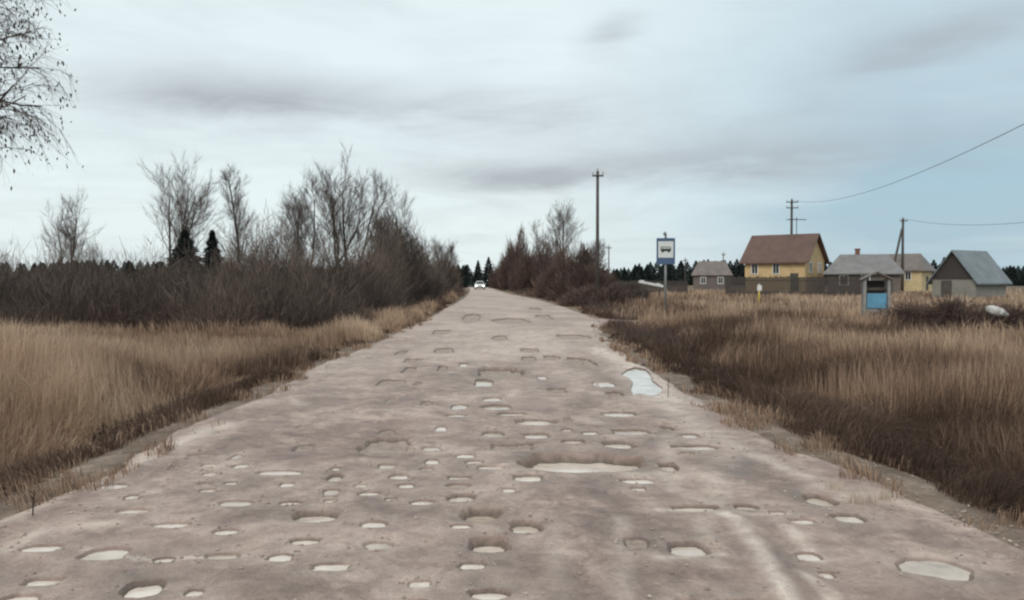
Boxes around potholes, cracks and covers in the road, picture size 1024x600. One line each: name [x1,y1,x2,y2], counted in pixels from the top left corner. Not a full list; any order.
pothole [666,541,712,556]
pothole [508,520,545,533]
pothole [516,452,648,473]
pothole [894,557,975,581]
pothole [74,546,134,560]
pothole [458,506,503,522]
pothole [793,551,824,561]
pothole [466,588,513,600]
pothole [355,436,412,456]
pothole [622,537,650,549]
pothole [307,562,356,571]
pothole [828,513,869,523]
